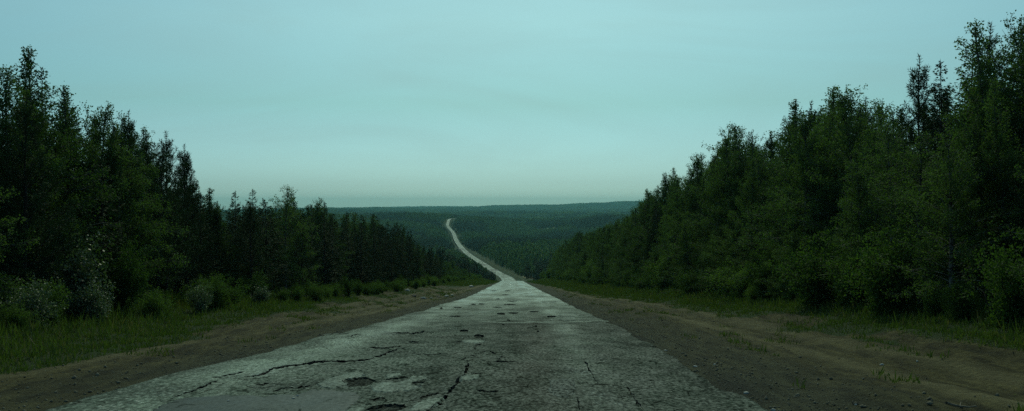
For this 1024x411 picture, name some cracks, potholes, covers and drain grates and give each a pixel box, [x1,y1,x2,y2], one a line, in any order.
crack [160,330,524,411]
pothole [361,402,416,411]
pothole [337,376,385,389]
crack [565,359,656,411]
